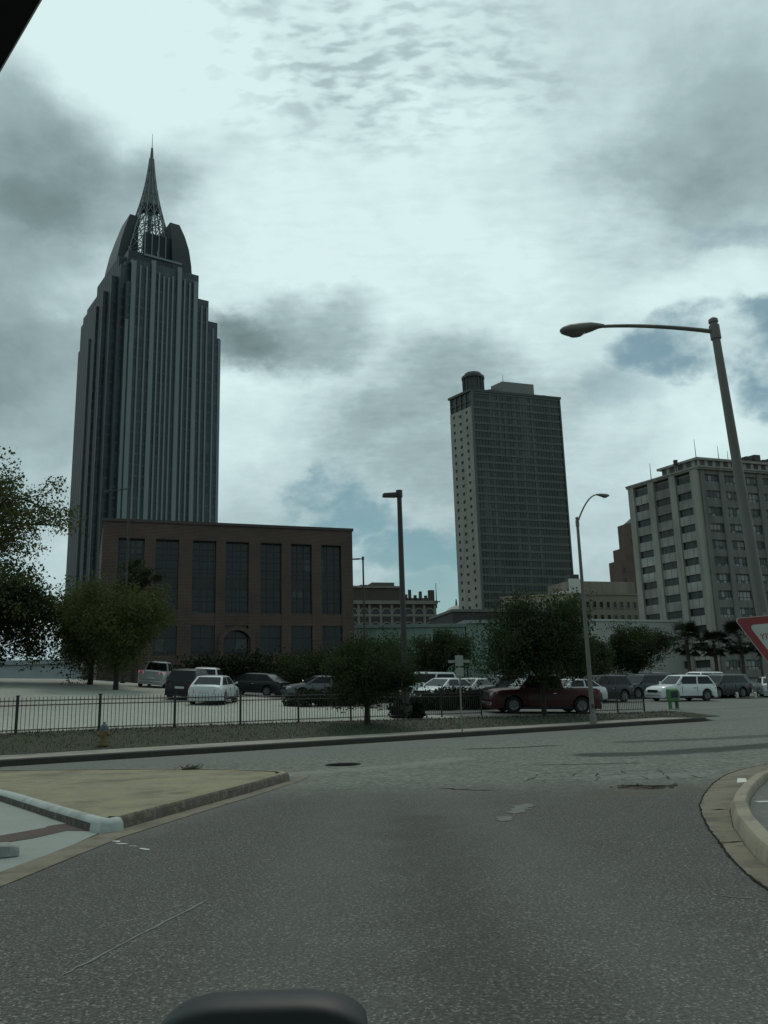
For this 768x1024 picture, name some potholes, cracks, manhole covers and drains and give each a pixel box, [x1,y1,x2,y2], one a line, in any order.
crack [528,762,701,782]
